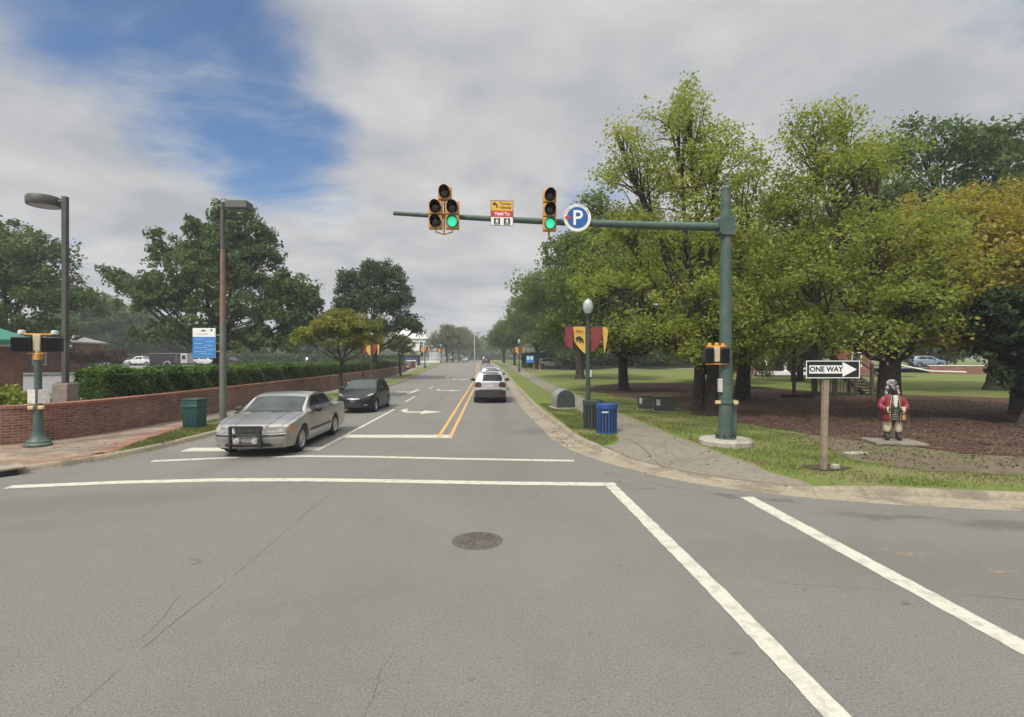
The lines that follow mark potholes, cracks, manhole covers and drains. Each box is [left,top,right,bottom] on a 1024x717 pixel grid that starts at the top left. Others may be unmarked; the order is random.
manhole cover [452,532,503,550]
